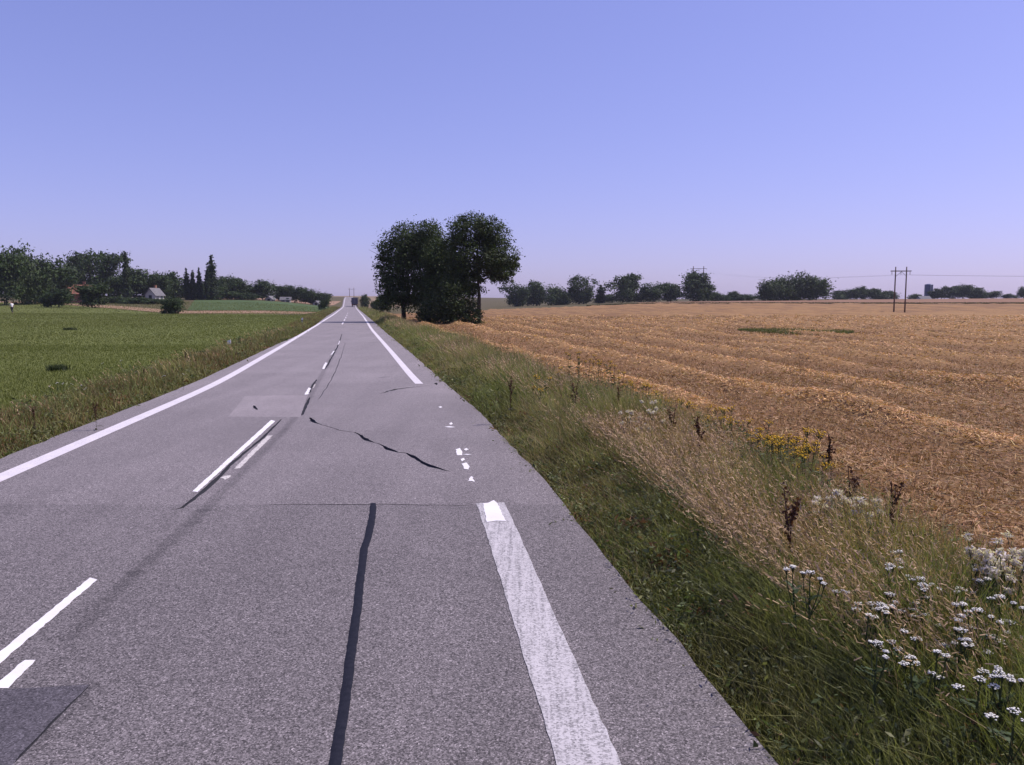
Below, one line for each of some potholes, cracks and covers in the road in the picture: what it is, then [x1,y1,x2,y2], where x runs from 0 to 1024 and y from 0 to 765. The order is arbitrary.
crack [301,334,447,471]
crack [172,405,464,765]
